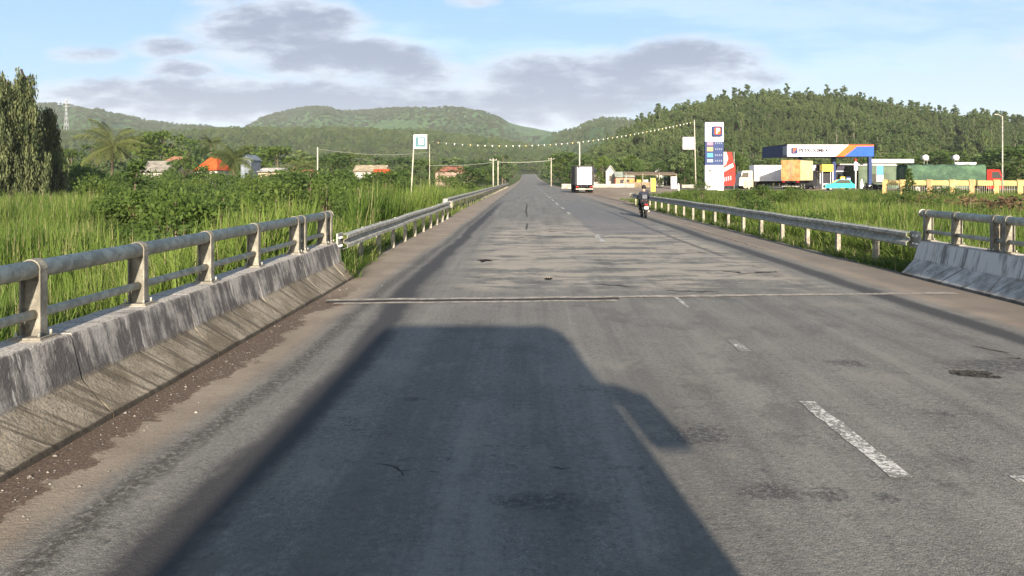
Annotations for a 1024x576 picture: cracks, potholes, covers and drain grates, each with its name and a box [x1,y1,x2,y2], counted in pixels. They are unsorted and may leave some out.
pothole [927,367,1024,381]
